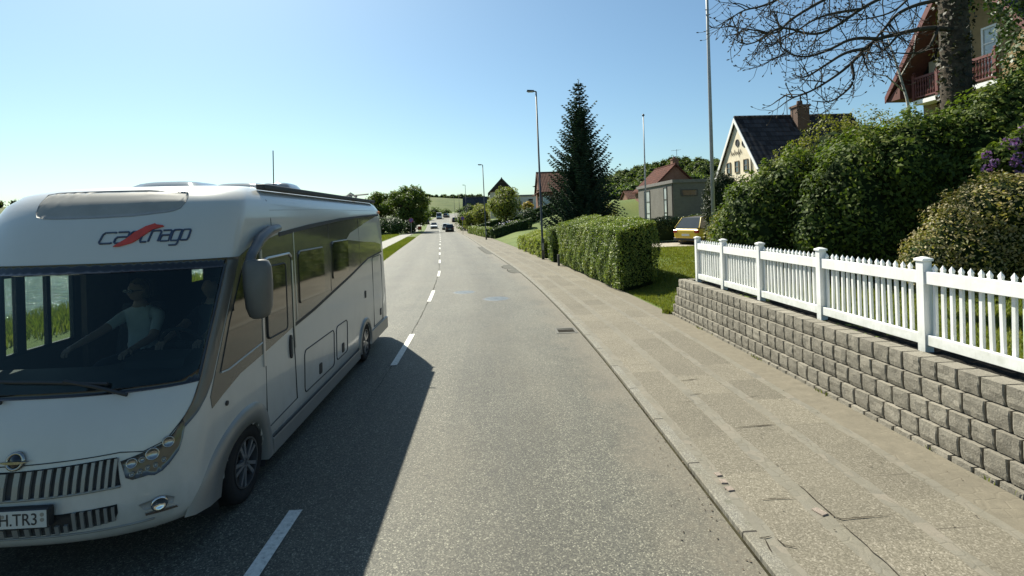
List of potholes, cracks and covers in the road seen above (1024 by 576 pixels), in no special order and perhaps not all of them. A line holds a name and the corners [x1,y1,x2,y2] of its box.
crack [799,485,900,576]
